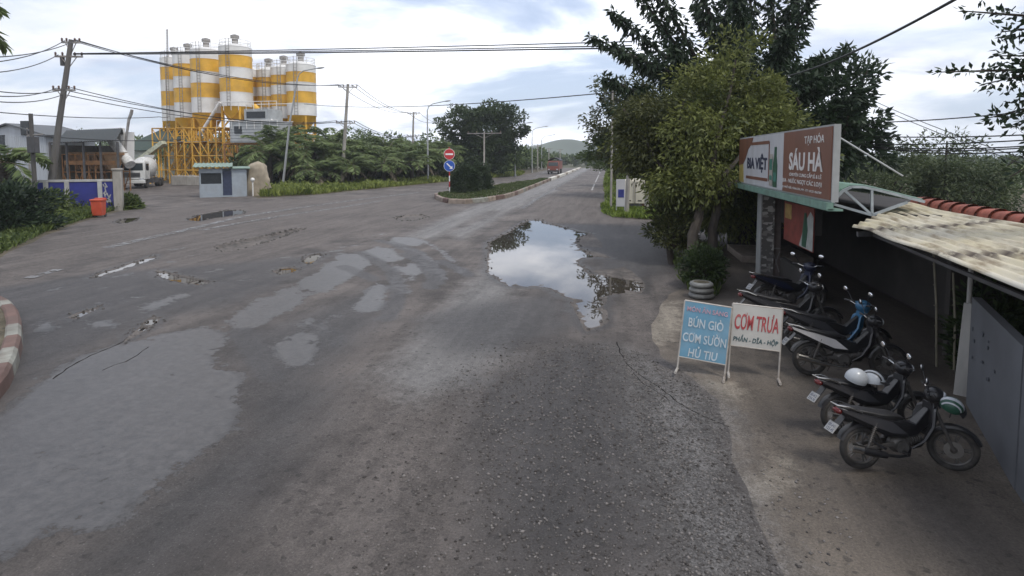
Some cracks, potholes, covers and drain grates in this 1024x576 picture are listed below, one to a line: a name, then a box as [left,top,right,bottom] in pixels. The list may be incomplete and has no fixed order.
pothole [67,304,105,321]
pothole [484,219,646,332]
pothole [153,269,216,285]
crack [616,342,729,427]
pothole [186,209,246,221]
pothole [271,266,302,275]
pothole [299,252,327,264]
crack [53,322,157,379]
pothole [118,315,166,344]
pothole [89,255,156,278]
pothole [213,228,306,252]
